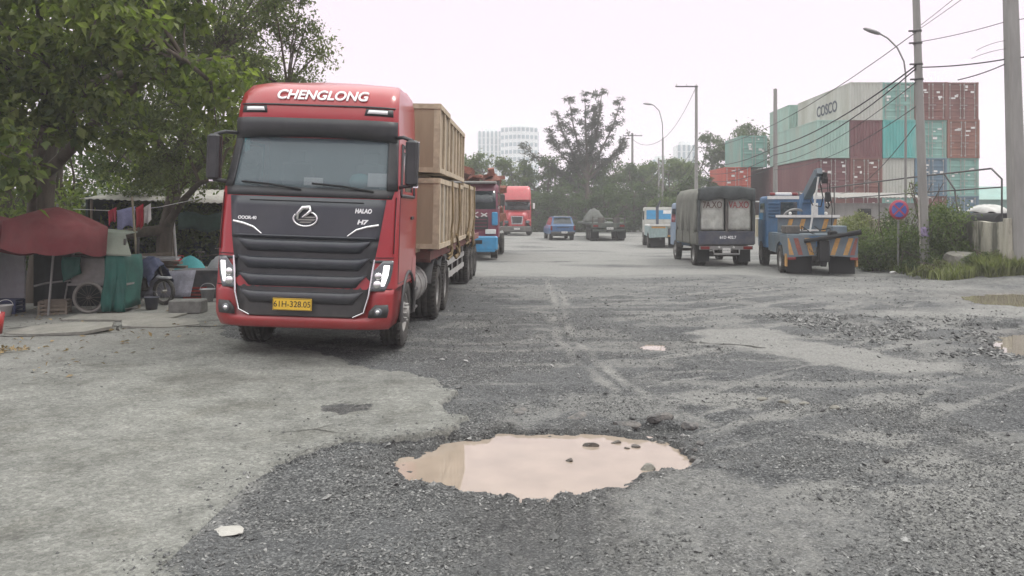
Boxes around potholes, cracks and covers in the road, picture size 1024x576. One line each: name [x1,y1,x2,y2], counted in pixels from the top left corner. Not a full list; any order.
pothole [944,289,1024,305]
pothole [356,421,705,500]
pothole [976,327,1024,352]
